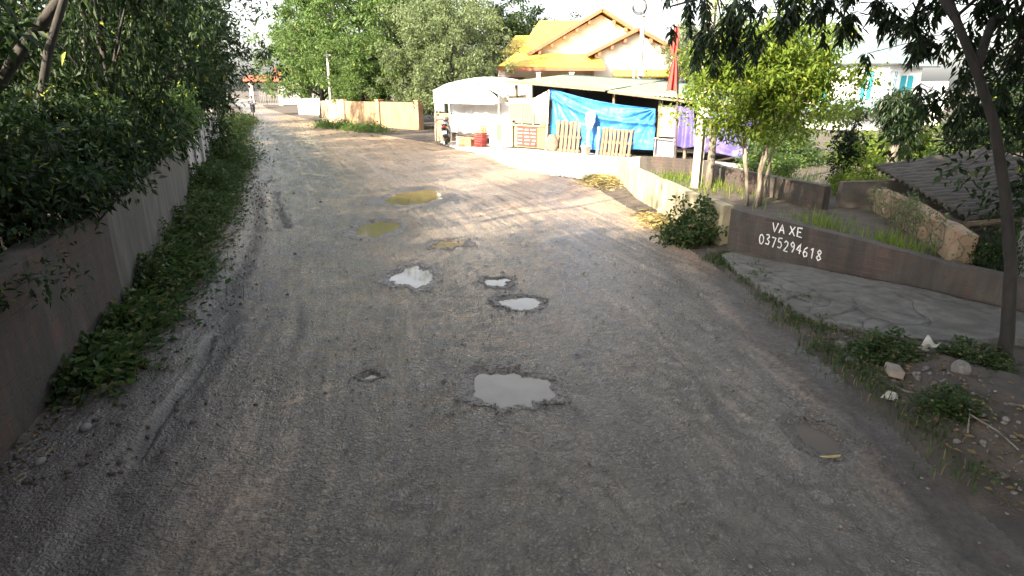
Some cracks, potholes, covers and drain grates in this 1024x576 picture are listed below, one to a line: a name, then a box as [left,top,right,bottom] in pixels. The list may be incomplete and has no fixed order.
pothole [423,237,479,250]
pothole [776,413,856,465]
pothole [353,365,388,382]
pothole [472,275,516,289]
pothole [487,290,549,312]
pothole [361,185,466,212]
pothole [442,361,573,429]
pothole [373,259,447,293]
pothole [336,215,419,244]
